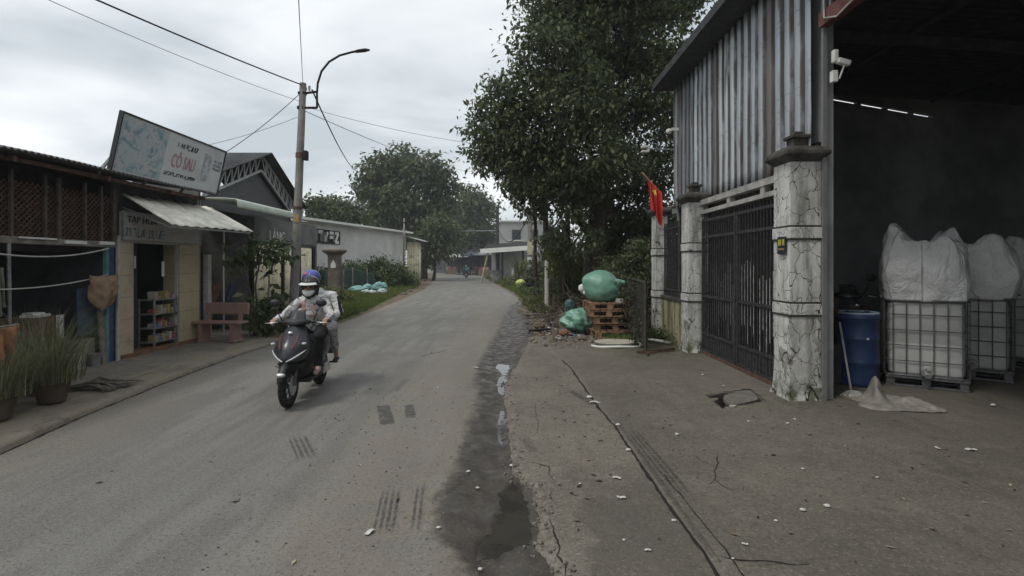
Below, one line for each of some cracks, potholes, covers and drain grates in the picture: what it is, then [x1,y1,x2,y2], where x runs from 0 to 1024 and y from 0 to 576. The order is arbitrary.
pothole [465,472,540,564]
manhole cover [706,389,766,409]
crack [544,521,567,576]
crack [715,555,806,565]
